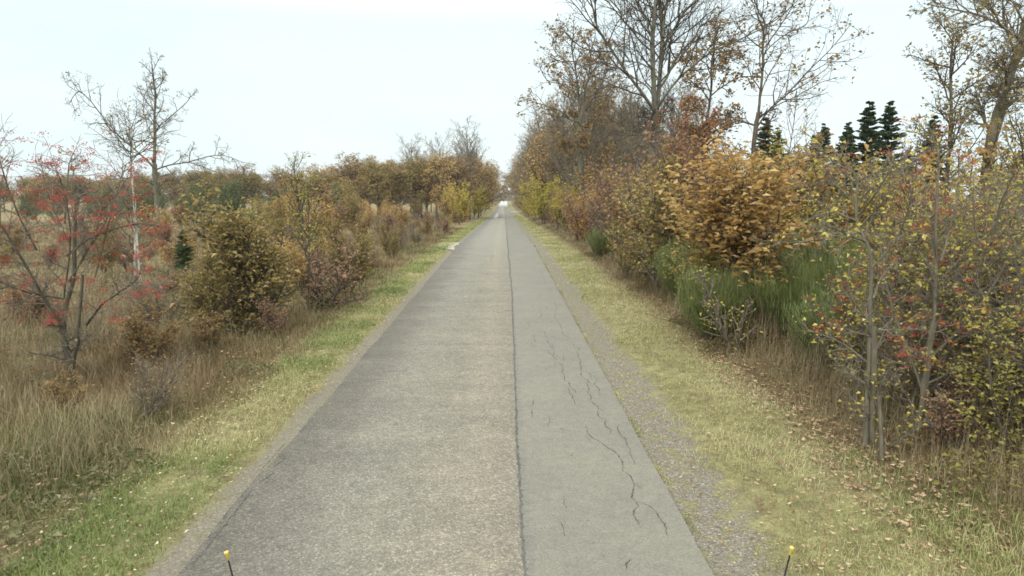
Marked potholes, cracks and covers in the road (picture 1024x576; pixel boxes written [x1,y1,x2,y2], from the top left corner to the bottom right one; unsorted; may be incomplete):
crack [527,272,668,536]
